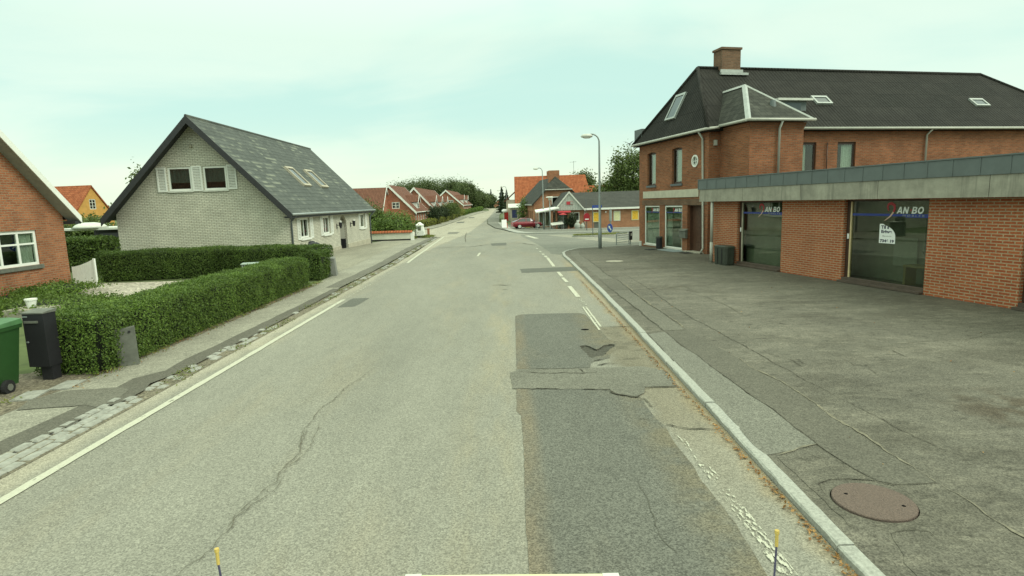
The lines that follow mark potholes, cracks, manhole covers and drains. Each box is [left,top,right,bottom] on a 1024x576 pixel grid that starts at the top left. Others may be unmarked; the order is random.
crack [177,368,373,575]
crack [519,359,676,419]
manhole cover [830,483,920,523]
pothole [580,344,615,358]
